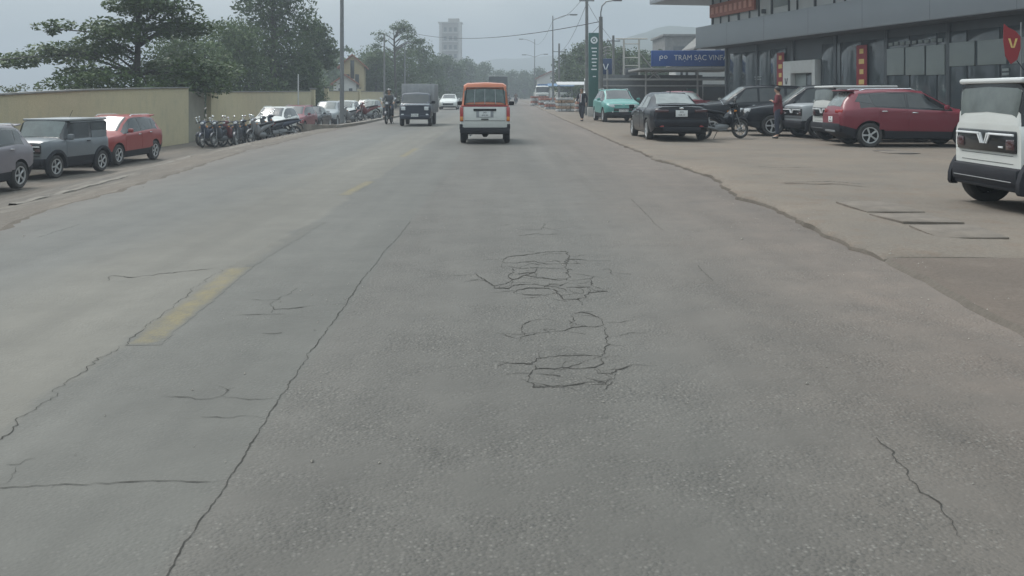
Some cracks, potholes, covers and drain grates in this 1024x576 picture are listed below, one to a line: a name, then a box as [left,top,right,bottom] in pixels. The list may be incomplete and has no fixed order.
crack [451,224,624,305]
crack [876,437,965,542]
crack [0,222,410,576]
crack [501,311,657,390]
